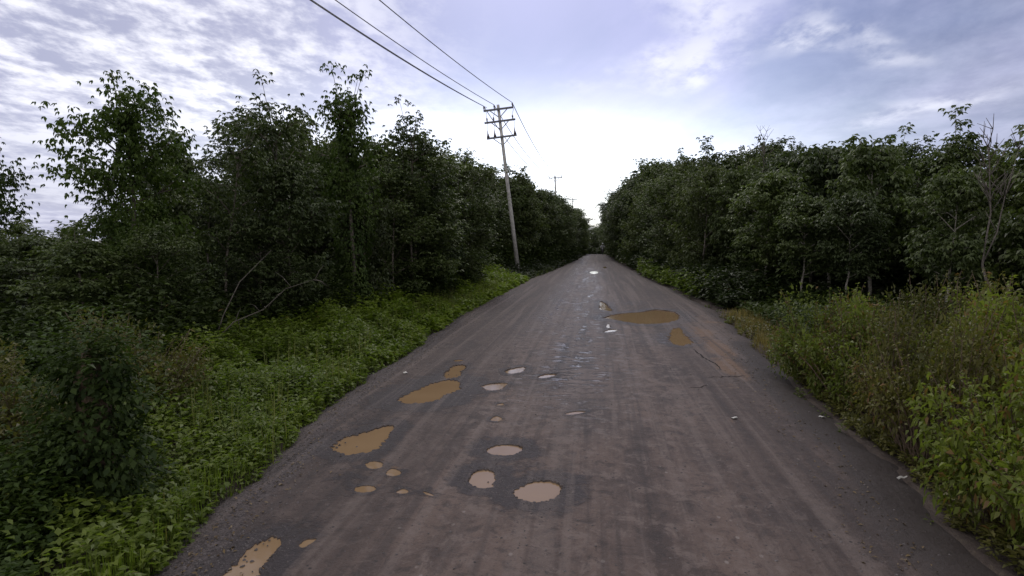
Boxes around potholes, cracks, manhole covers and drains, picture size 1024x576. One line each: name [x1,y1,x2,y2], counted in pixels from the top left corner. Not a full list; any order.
pothole [316,420,412,462]
pothole [592,308,694,325]
pothole [479,382,513,393]
pothole [364,374,492,411]
pothole [198,522,305,576]
pothole [470,437,543,465]
pothole [448,459,513,502]
pothole [500,366,530,376]
pothole [657,326,708,346]
pothole [365,461,383,469]
crack [691,350,739,388]
pothole [442,362,473,380]
